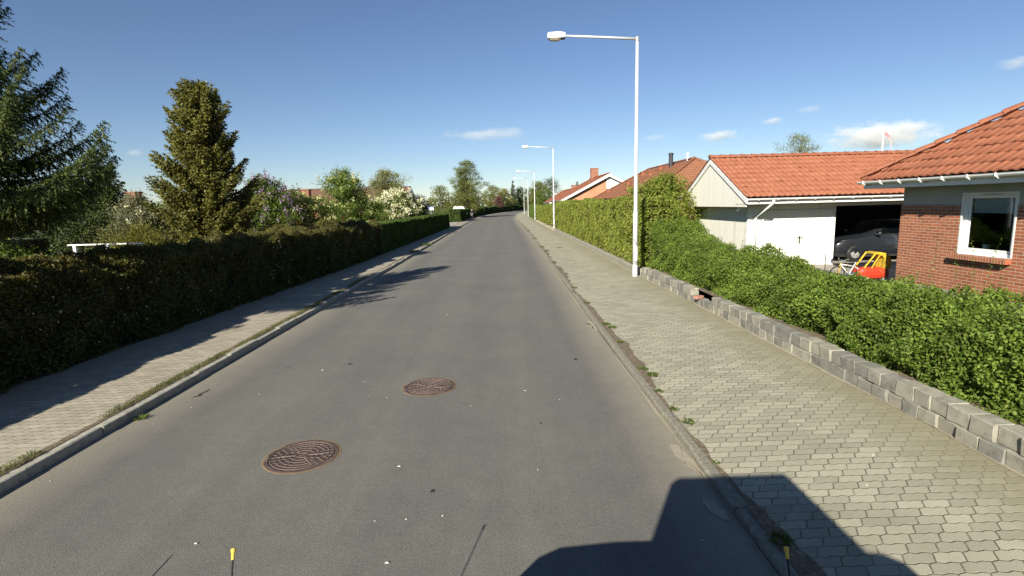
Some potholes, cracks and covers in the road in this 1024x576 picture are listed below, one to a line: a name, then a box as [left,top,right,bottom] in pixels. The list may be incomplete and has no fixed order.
manhole cover [262,439,341,474]
manhole cover [402,378,457,396]
